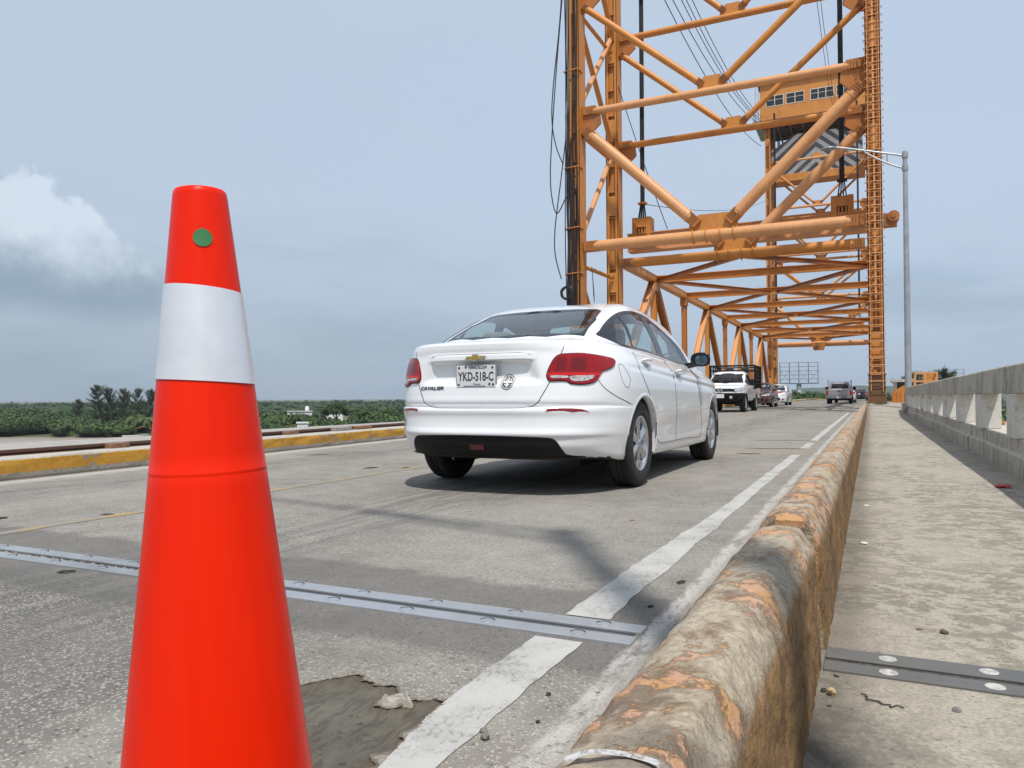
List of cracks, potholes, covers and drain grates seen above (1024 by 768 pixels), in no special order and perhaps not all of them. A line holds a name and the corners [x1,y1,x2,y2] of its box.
pothole [300,673,447,768]
crack [861,693,904,708]
